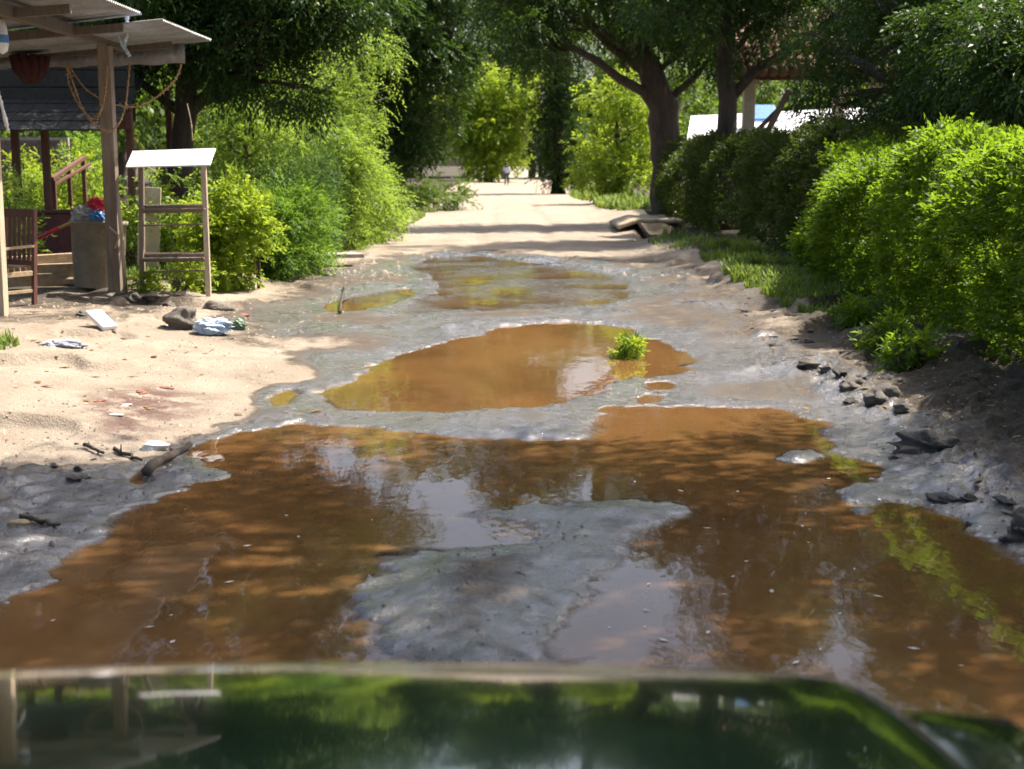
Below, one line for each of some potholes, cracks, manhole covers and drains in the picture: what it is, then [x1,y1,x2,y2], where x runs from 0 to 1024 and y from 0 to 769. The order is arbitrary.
pothole [0,401,1024,730]
pothole [300,318,722,415]
pothole [388,253,648,316]
pothole [313,285,421,313]
